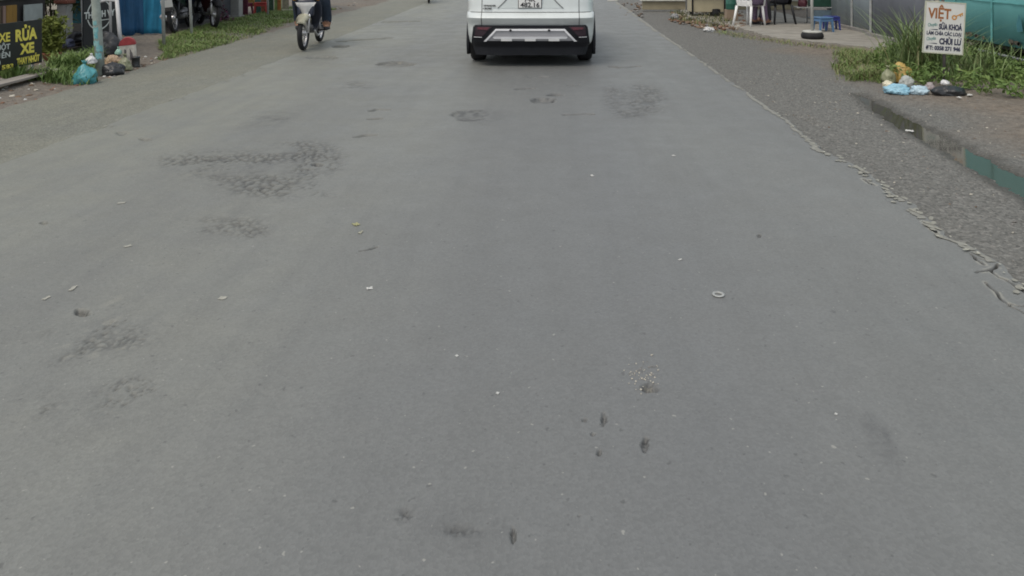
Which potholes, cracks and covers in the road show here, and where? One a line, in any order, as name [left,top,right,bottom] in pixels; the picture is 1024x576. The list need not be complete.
pothole [638,383,662,395]
pothole [507,525,517,546]
crack [903,210,1024,320]
crack [853,170,886,192]
pothole [599,411,609,428]
pothole [446,109,494,122]
pothole [639,435,651,455]
